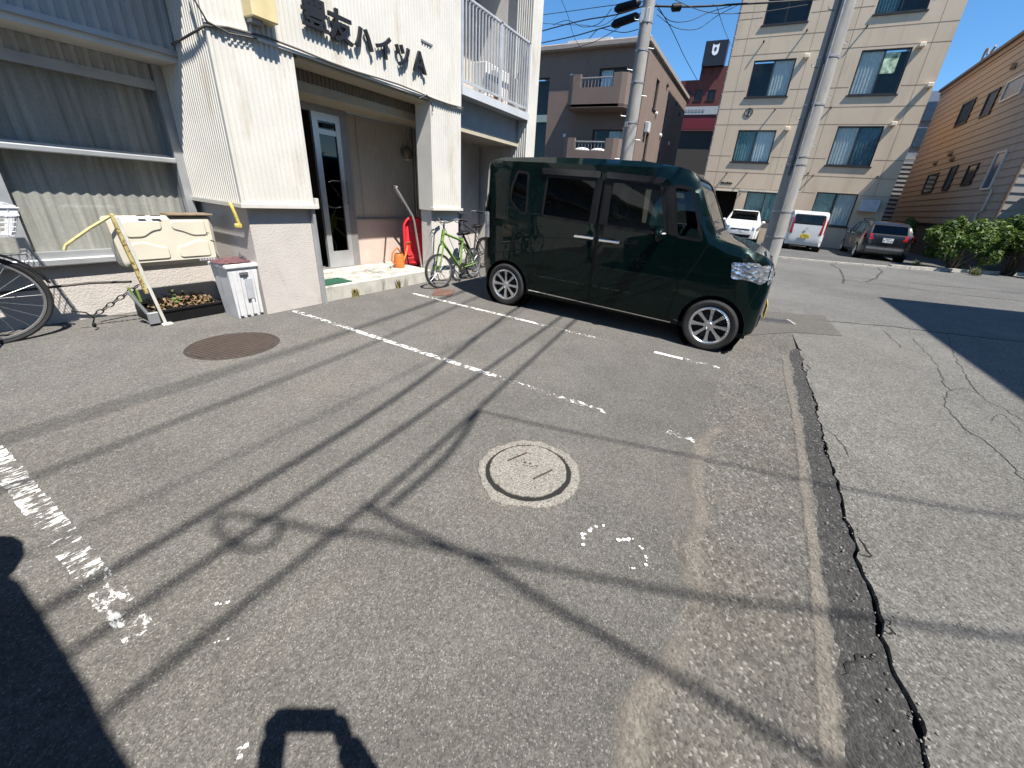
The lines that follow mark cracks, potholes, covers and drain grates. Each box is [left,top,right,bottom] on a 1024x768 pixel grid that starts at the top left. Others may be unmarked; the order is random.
crack [798,349,926,768]
manhole cover [183,332,280,360]
crack [884,331,1024,480]
manhole cover [477,440,580,508]
